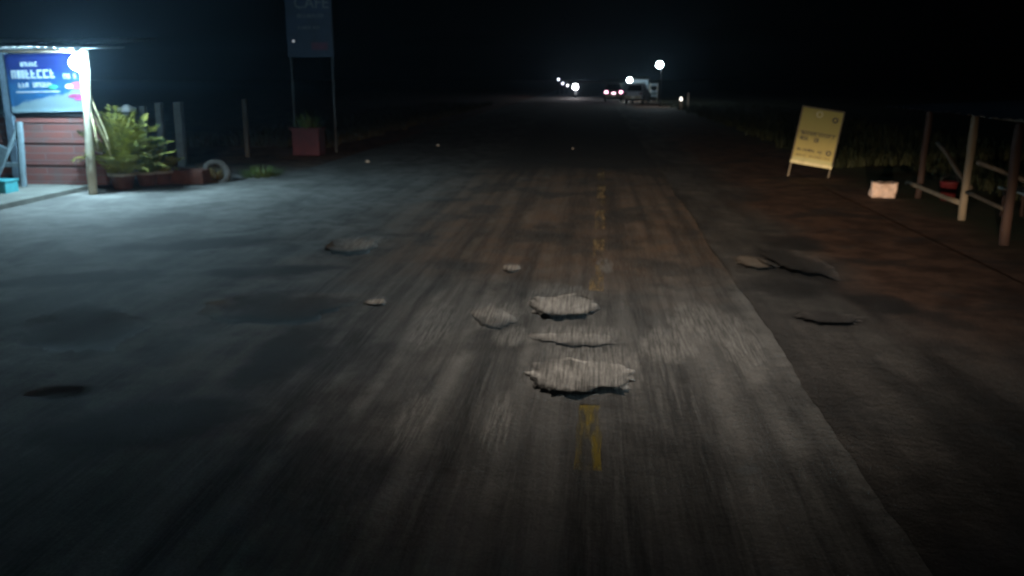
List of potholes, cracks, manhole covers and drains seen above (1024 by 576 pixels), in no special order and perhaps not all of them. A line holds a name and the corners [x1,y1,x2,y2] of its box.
pothole [364,298,387,307]
pothole [324,236,378,257]
pothole [733,256,780,271]
pothole [502,264,521,274]
pothole [758,246,840,281]
pothole [20,384,92,401]
pothole [527,332,617,348]
pothole [528,293,601,322]
pothole [524,357,636,400]
pothole [471,305,517,330]
pothole [792,311,864,326]
